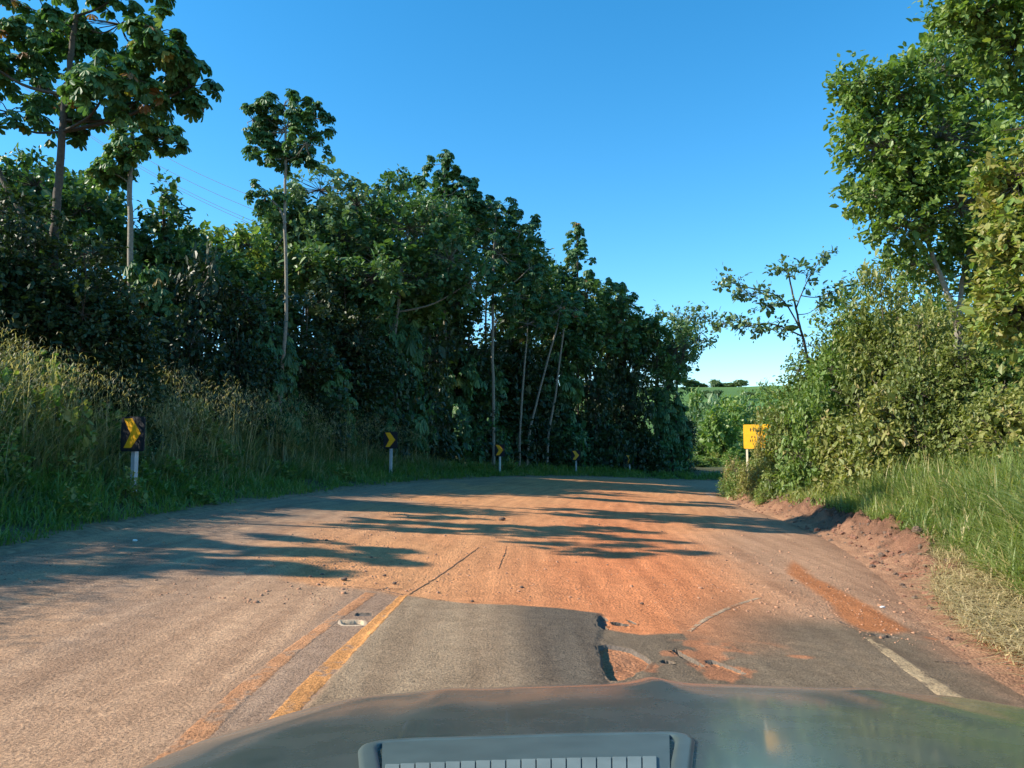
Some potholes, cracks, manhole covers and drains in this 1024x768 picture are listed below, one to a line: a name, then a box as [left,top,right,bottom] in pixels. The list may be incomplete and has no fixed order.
pothole [594,615,612,631]
crack [346,548,478,601]
pothole [596,643,656,683]
pothole [670,648,708,669]
